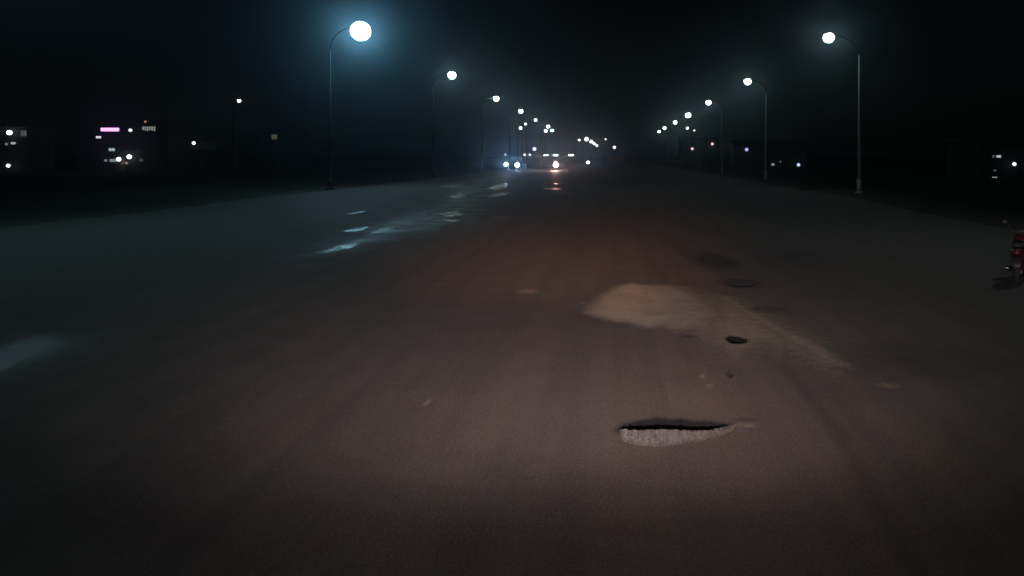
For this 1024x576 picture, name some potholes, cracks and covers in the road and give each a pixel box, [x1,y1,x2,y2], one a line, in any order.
pothole [718,334,754,346]
pothole [608,414,740,448]
